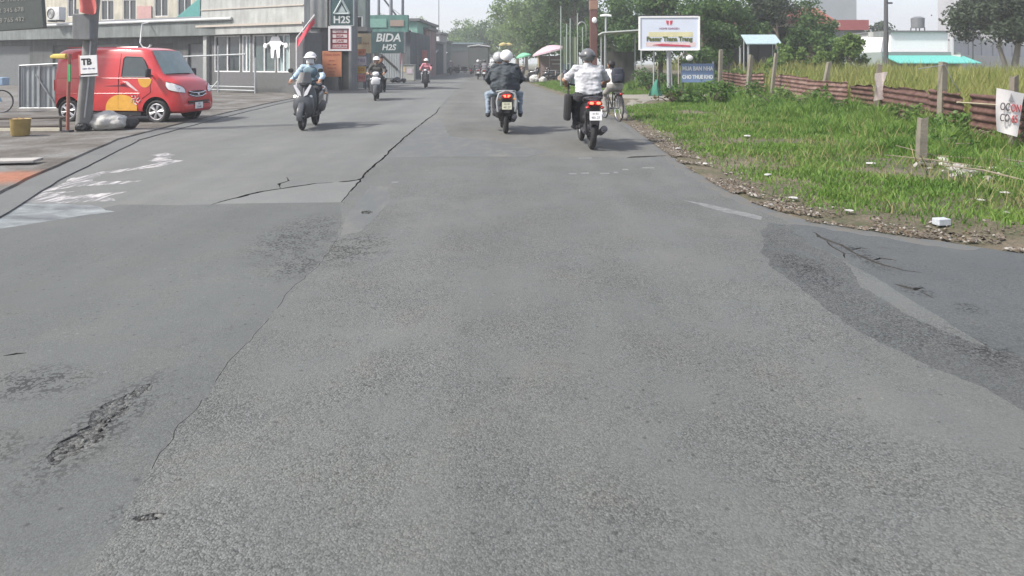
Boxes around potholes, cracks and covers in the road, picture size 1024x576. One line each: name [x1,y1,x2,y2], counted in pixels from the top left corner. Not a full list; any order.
pothole [132,512,166,522]
crack [813,232,934,299]
pothole [45,382,154,467]
crack [214,178,361,204]
